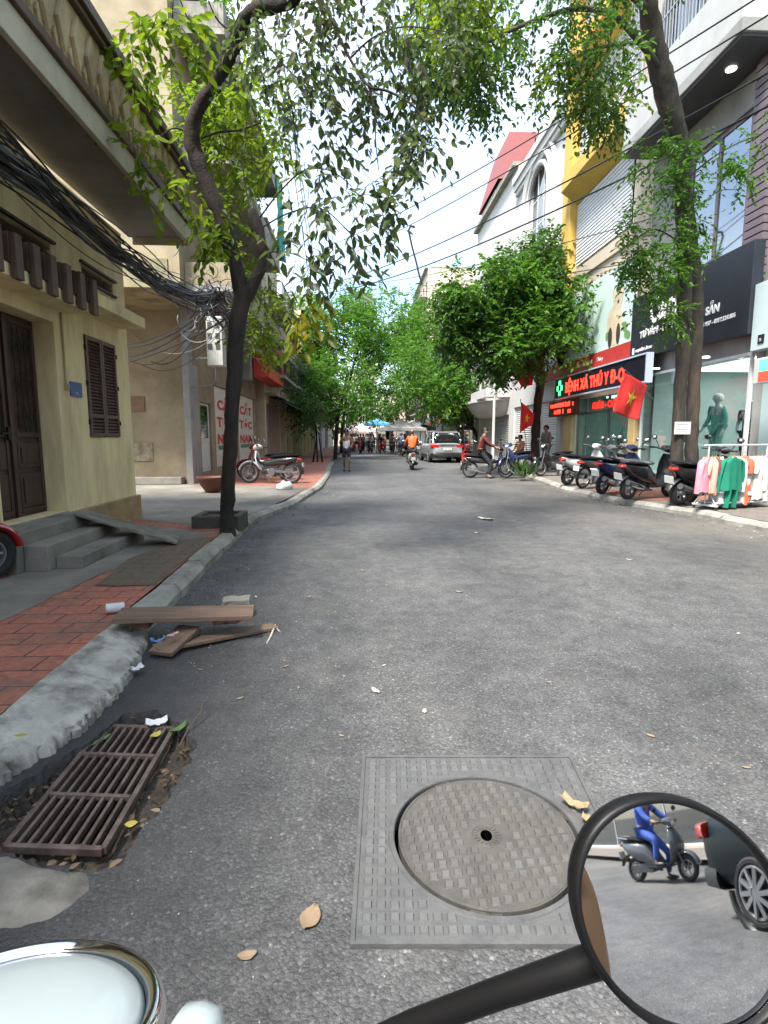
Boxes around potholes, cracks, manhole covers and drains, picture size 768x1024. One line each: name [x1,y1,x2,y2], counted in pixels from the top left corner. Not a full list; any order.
drain grate [2,724,176,857]
manhole cover [350,755,598,949]
